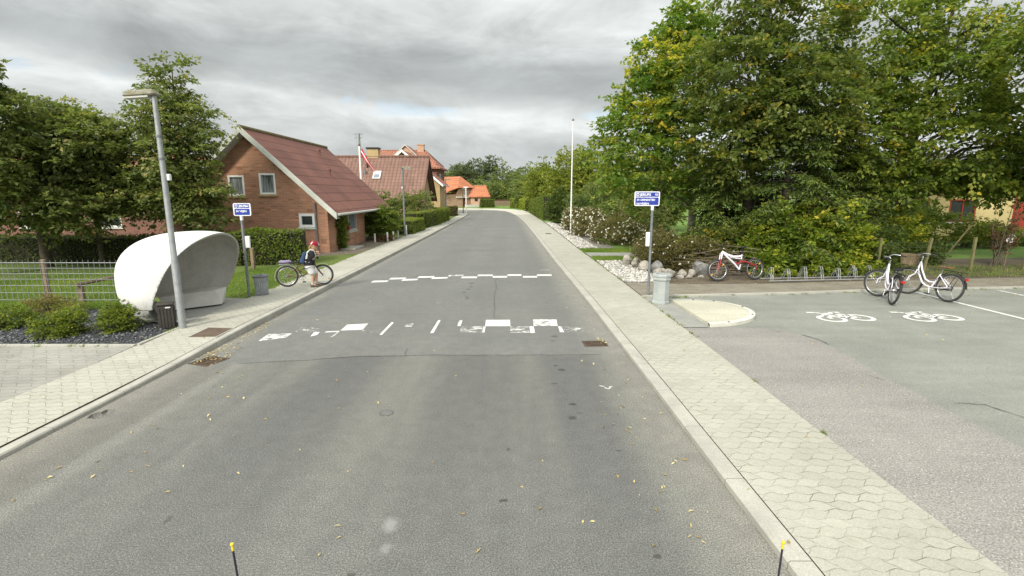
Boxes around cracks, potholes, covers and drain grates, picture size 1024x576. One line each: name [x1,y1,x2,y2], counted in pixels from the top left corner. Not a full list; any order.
drain grate [188,356,230,367]
manhole cover [186,327,234,339]
